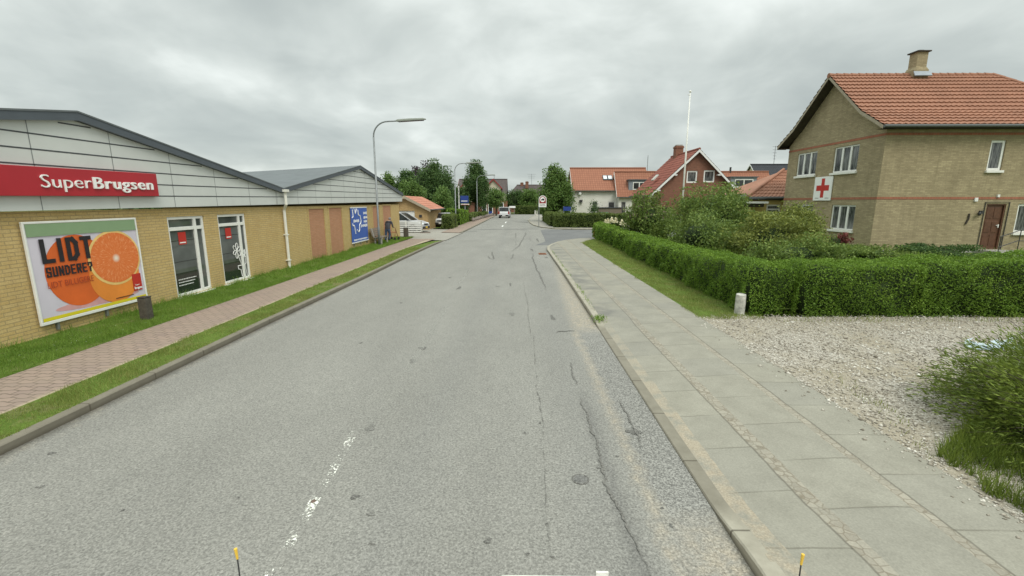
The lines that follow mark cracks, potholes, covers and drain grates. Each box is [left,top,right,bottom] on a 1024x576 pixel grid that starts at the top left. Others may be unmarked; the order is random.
manhole cover [572,474,589,484]
crack [580,401,649,572]
